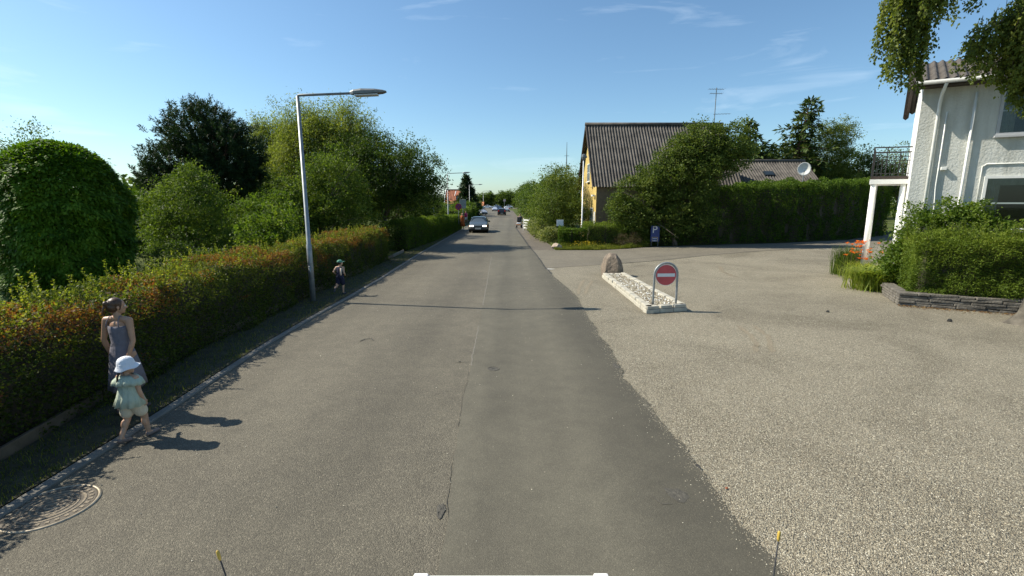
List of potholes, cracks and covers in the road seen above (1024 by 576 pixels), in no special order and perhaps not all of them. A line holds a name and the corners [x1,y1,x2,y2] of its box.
manhole cover [0,484,102,534]
pothole [436,503,446,519]
